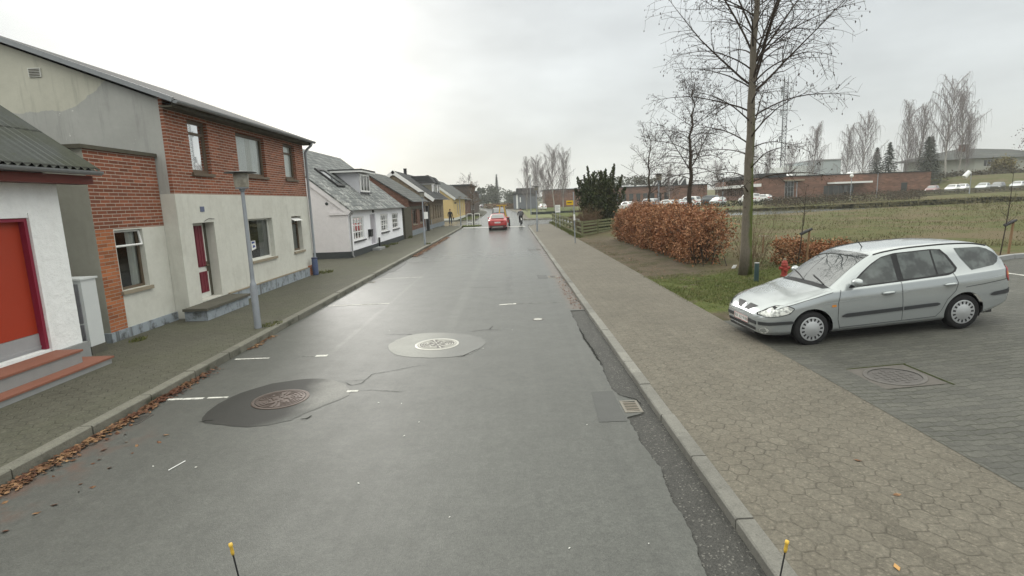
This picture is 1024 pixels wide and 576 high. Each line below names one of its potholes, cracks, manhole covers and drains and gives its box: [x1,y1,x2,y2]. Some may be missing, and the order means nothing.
drain grate [619,400,644,413]
manhole cover [848,363,954,389]
manhole cover [415,338,459,350]
manhole cover [251,389,310,410]
